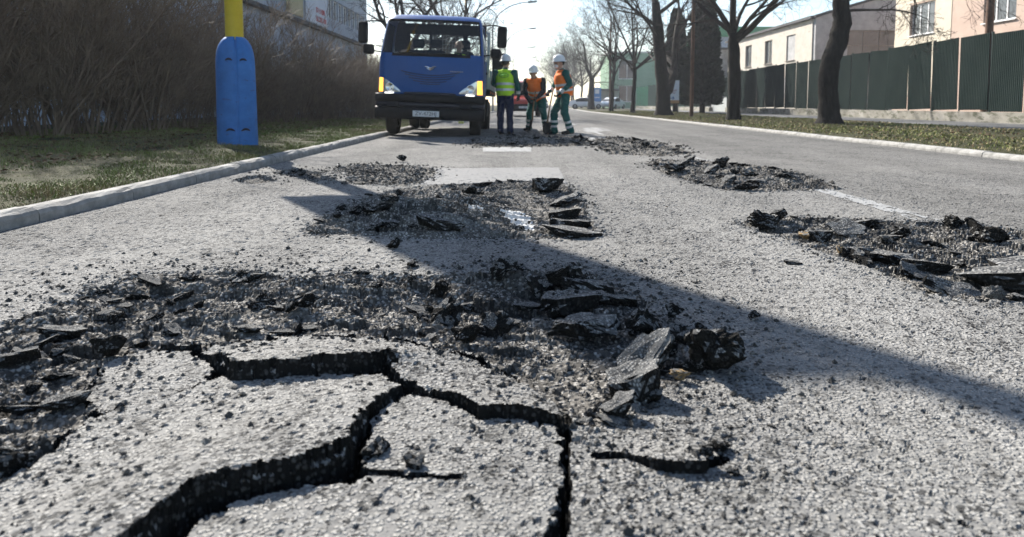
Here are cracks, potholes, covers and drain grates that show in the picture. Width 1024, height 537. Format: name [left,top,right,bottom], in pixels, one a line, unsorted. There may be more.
pothole [272,169,331,182]
pothole [233,175,276,184]
pothole [738,216,1024,302]
pothole [593,137,694,157]
pothole [337,164,436,186]
pothole [644,159,841,192]
pothole [303,180,600,240]
pothole [0,269,689,482]
crack [590,434,730,474]
pothole [468,135,591,148]
